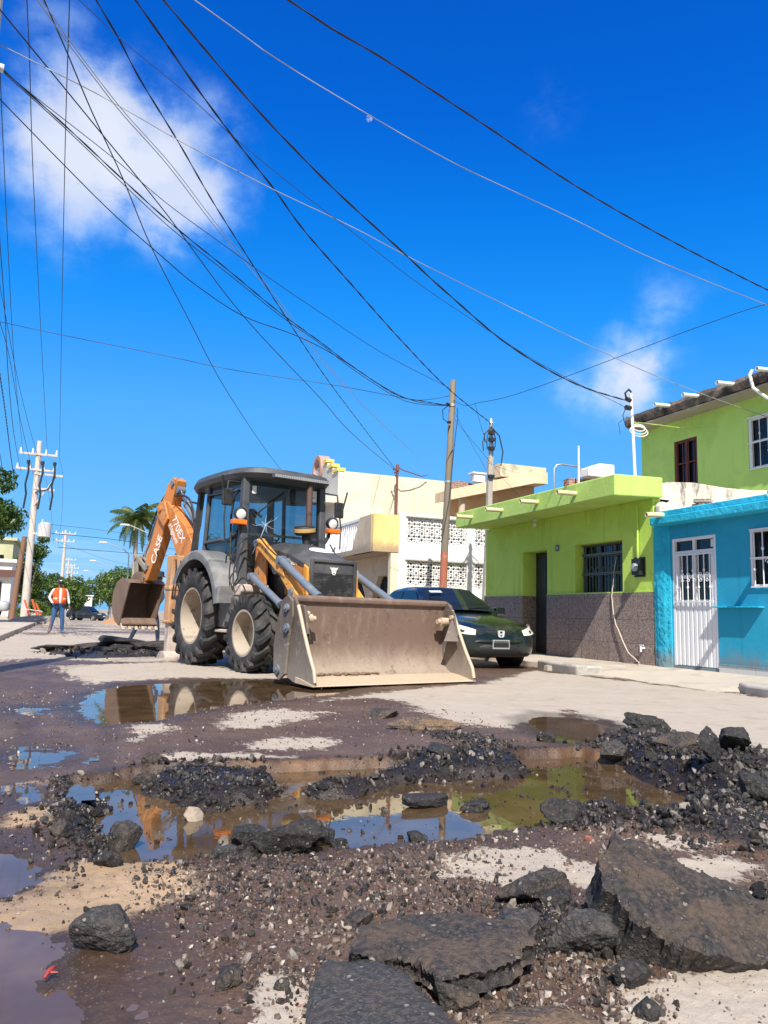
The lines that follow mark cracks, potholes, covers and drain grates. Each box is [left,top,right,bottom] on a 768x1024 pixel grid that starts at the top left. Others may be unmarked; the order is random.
pothole [513,711,625,746]
pothole [57,744,736,866]
pothole [50,678,367,727]
